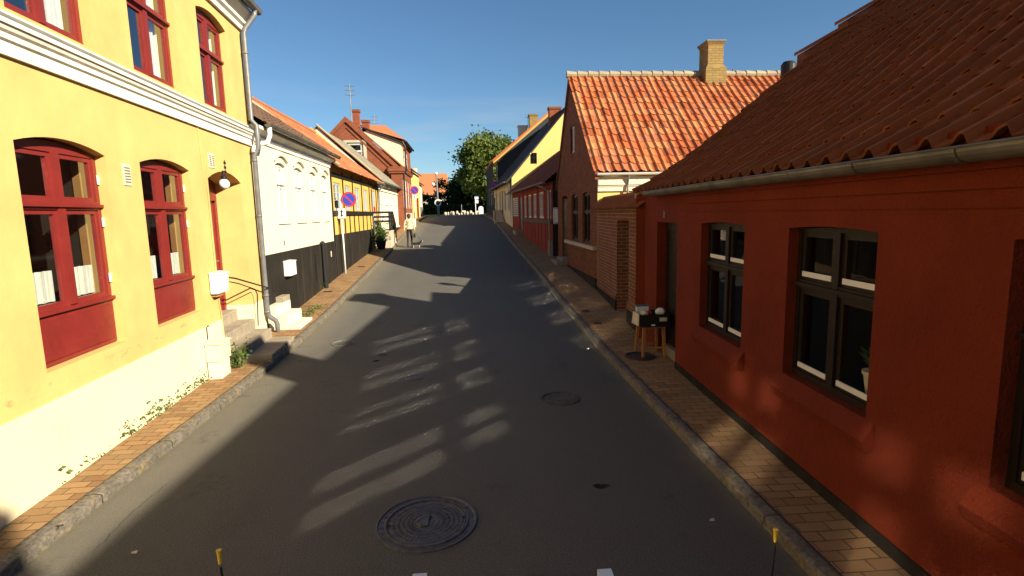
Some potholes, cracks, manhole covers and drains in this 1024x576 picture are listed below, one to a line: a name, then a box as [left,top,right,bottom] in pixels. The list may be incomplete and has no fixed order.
manhole cover [540,391,580,406]
manhole cover [375,495,477,554]
